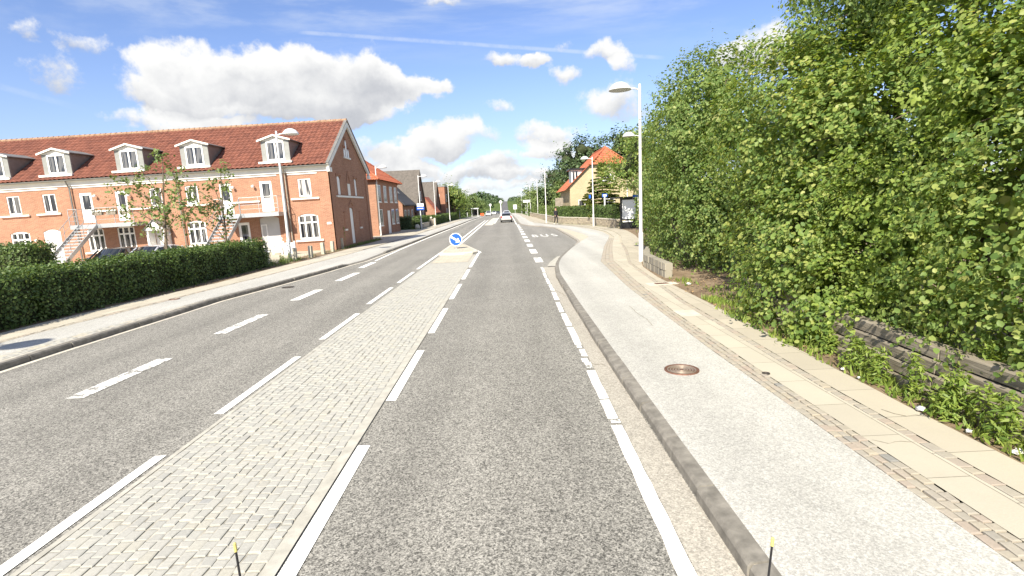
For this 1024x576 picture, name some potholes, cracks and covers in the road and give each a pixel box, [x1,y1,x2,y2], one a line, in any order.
manhole cover [664,364,700,376]
